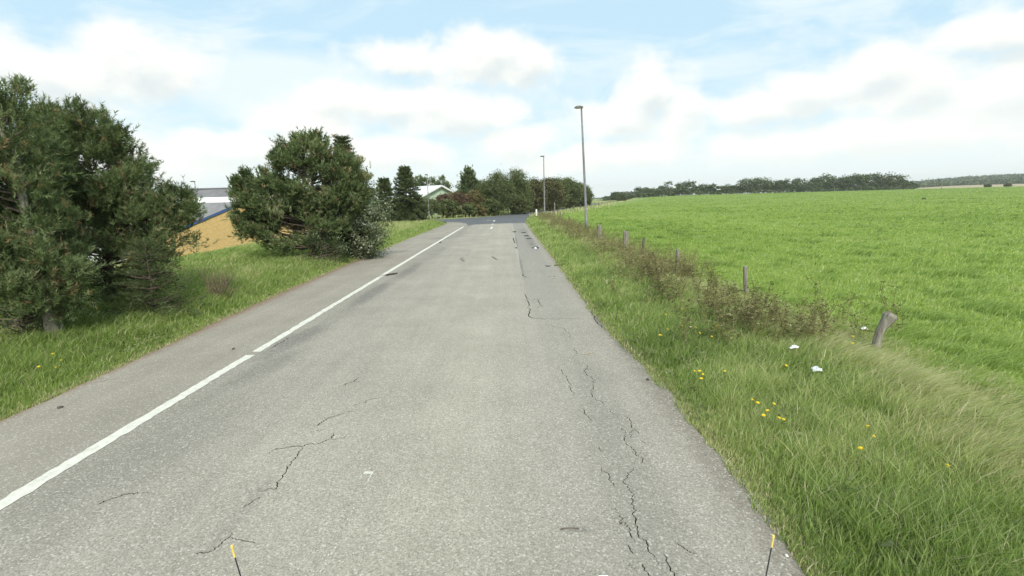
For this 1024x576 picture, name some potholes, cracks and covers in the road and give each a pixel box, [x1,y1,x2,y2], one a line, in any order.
crack [243,379,374,508]
